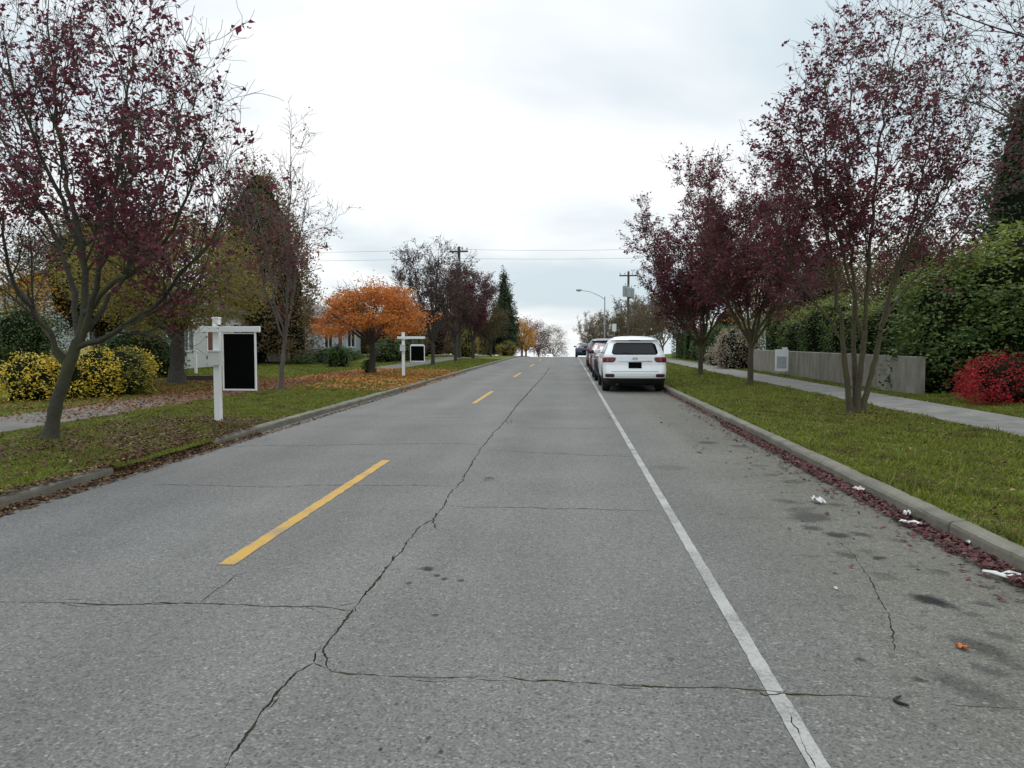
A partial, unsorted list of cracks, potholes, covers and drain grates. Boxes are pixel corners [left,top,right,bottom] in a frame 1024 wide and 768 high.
crack [0,368,1024,768]
